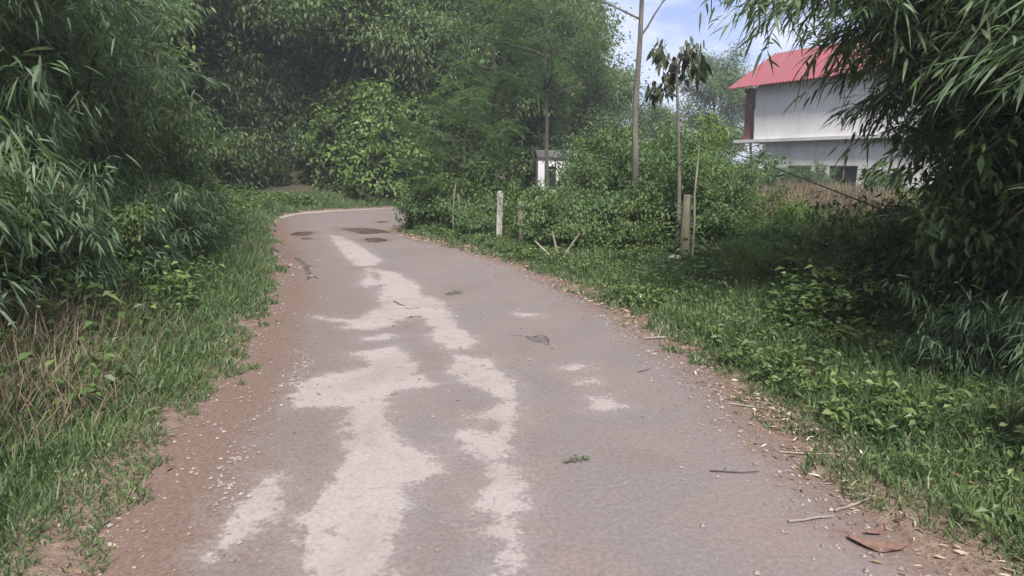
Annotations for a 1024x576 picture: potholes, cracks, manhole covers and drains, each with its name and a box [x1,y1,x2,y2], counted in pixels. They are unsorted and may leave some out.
pothole [525,335,550,346]
crack [296,258,320,280]
